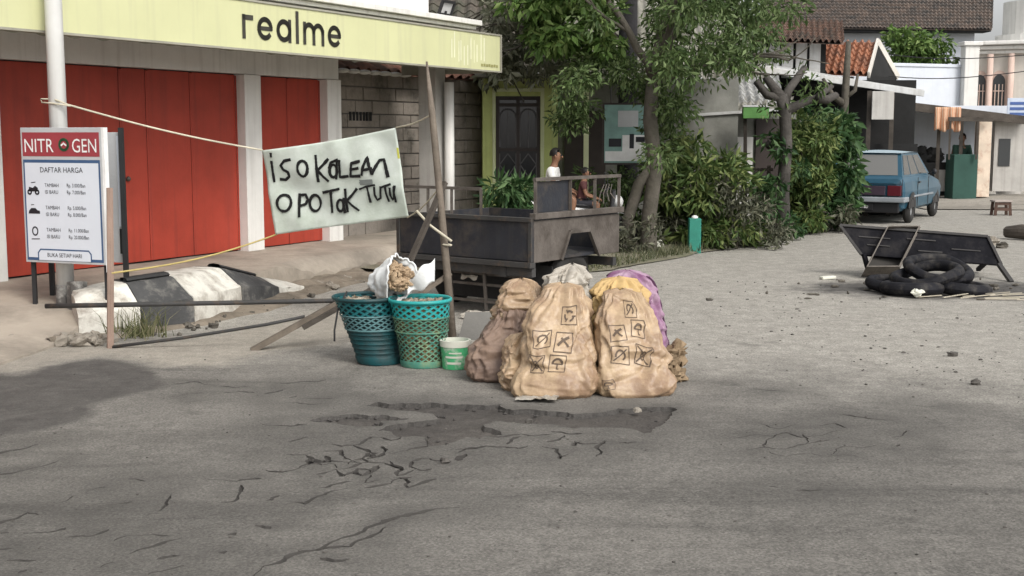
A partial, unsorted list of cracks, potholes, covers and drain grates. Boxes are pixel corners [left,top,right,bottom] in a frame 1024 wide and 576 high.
crack [738,414,882,456]
crack [209,424,633,576]
crack [0,444,57,475]
pothole [367,402,677,446]
crack [0,479,184,574]
